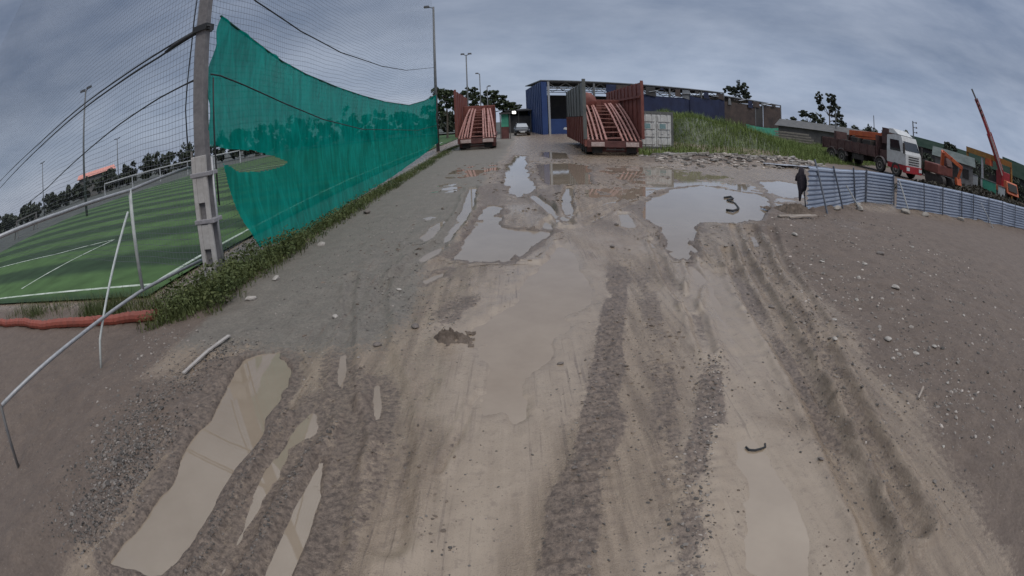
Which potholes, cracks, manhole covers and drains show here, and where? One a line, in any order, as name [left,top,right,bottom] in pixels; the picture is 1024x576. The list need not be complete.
pothole [493,155,551,198]
pothole [438,202,564,267]
pothole [86,343,314,576]
pothole [629,185,779,264]
